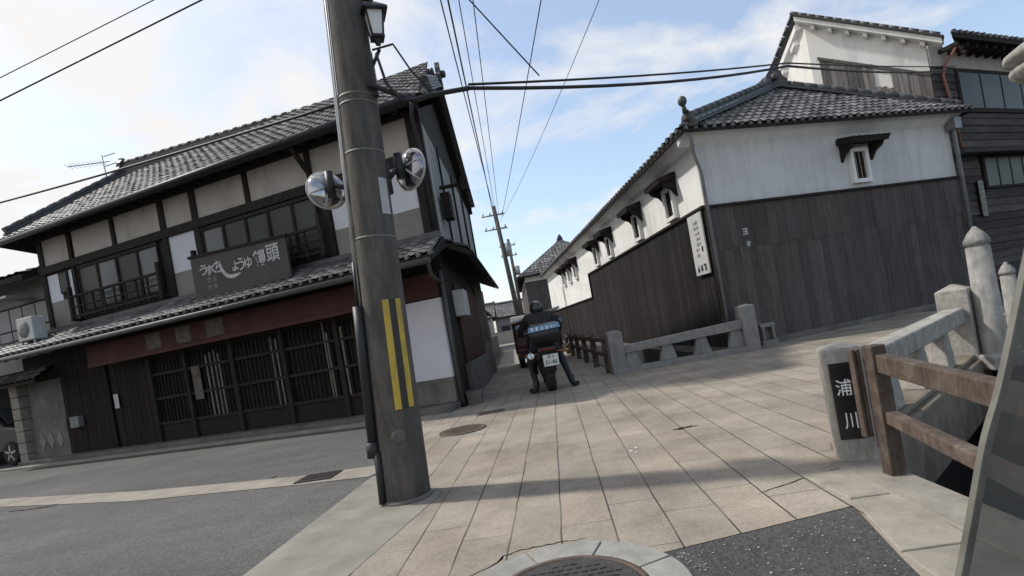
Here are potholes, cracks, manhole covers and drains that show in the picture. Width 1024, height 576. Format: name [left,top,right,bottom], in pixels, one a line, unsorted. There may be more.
manhole cover [439,424,486,437]
drain grate [293,469,343,484]
manhole cover [480,541,692,576]
crack [471,538,584,576]
